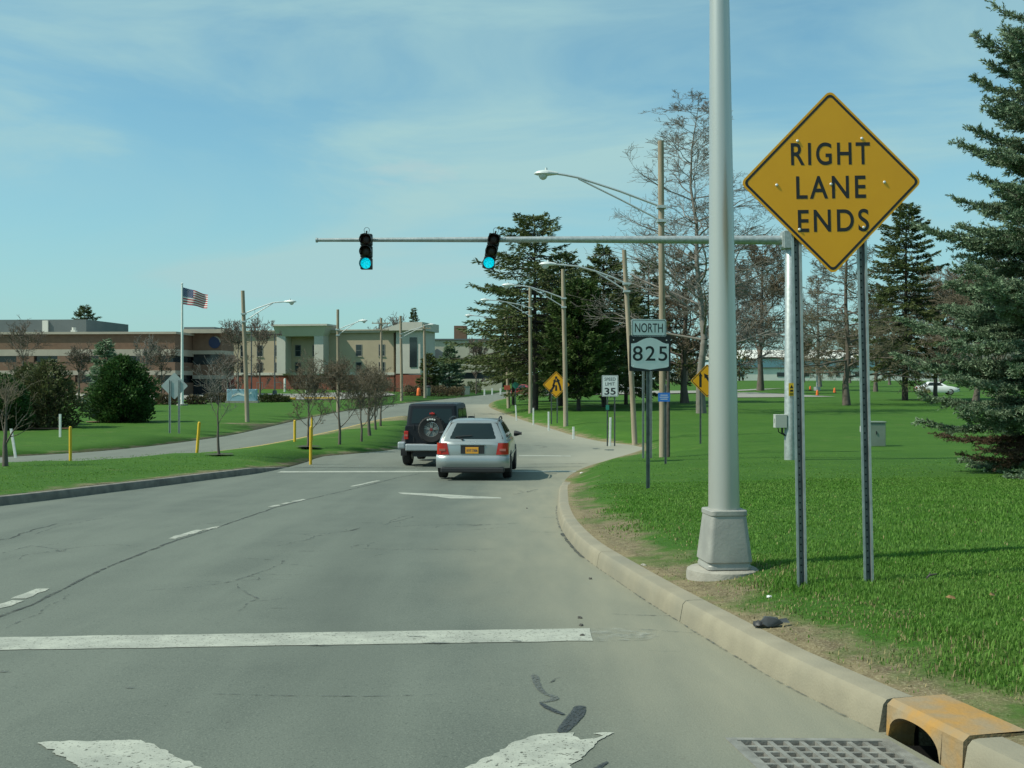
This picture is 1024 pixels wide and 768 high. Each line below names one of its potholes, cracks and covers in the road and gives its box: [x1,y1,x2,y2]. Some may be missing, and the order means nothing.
drain grate [725,737,939,768]
